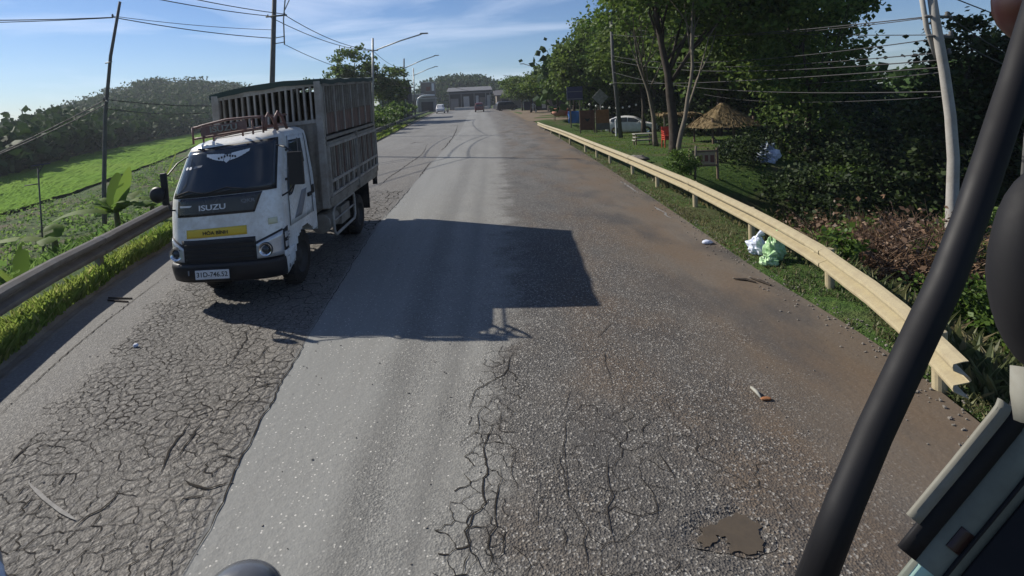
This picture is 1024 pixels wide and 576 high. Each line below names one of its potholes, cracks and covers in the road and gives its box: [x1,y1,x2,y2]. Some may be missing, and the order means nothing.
crack [433,344,806,576]
pothole [652,496,807,571]
crack [0,275,322,576]
